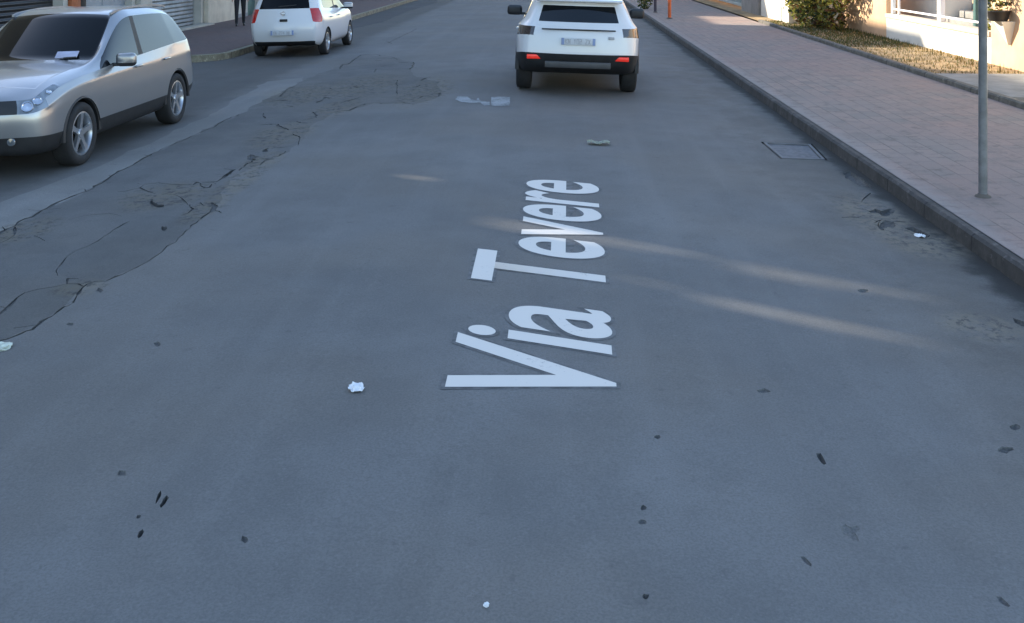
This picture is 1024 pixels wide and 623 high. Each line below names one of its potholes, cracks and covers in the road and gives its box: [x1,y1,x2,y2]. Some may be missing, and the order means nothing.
pothole [879,221,896,231]
crack [0,32,441,341]
